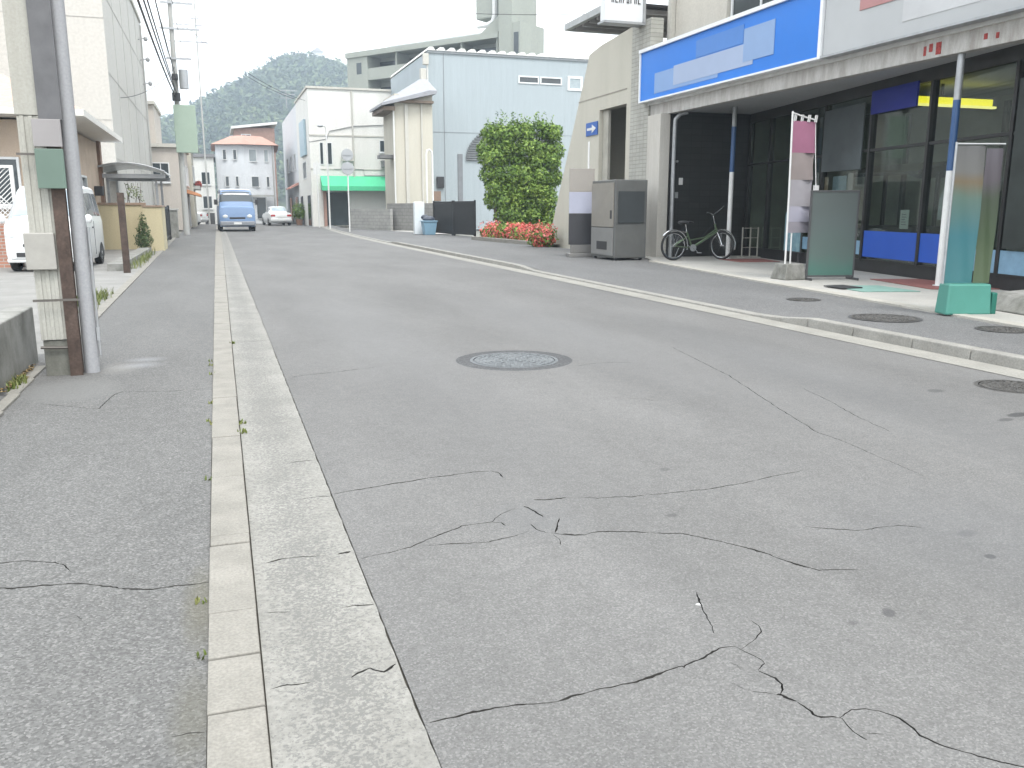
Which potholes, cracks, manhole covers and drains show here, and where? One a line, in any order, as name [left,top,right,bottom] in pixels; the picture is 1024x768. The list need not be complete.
crack [674,348,924,477]
crack [365,472,853,571]
crack [4,561,206,590]
manhole cover [456,350,572,371]
manhole cover [974,380,1024,394]
manhole cover [848,314,923,323]
crack [305,471,503,499]
crack [430,593,1023,767]
crack [352,664,396,677]
